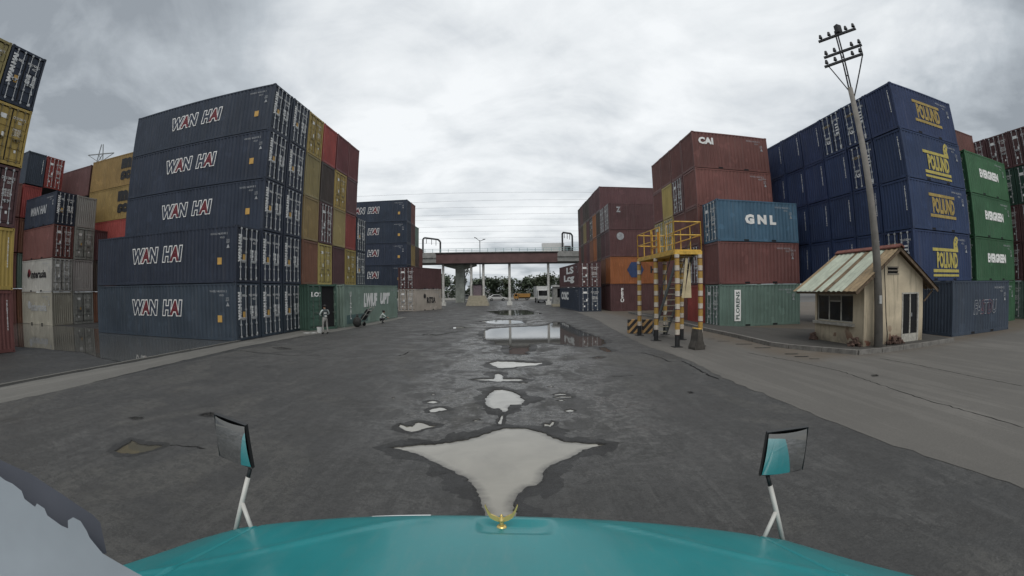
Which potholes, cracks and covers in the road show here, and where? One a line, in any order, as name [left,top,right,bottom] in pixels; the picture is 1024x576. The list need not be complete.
pothole [473,386,546,415]
pothole [468,372,536,383]
pothole [106,437,170,458]
crack [641,352,719,379]
pothole [476,321,613,355]
pothole [390,419,445,434]
pothole [372,424,619,517]
pothole [483,360,553,370]
